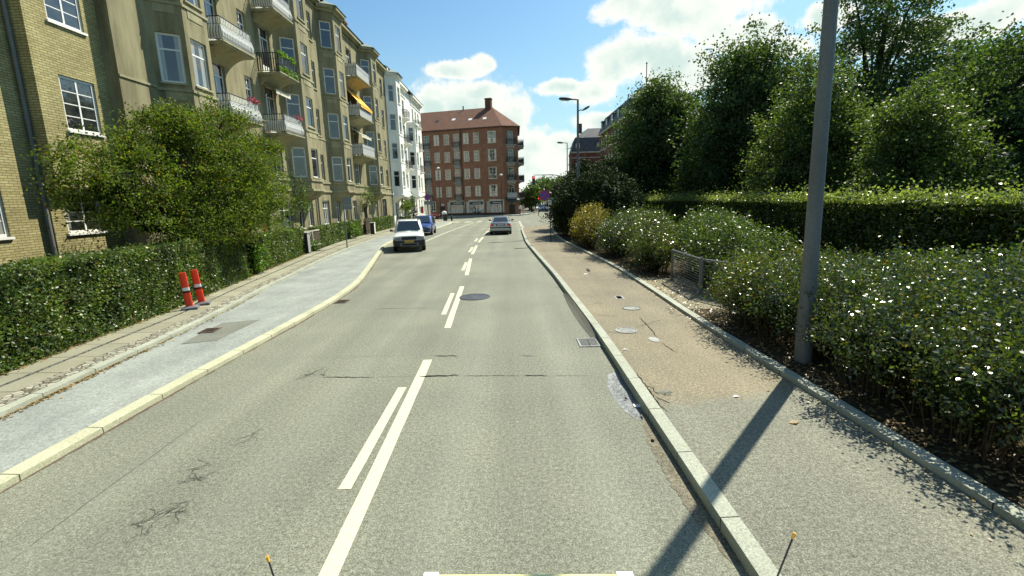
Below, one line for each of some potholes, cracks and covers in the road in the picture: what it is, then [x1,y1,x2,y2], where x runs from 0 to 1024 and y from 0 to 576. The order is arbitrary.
crack [125,500,190,544]
crack [637,374,672,411]
drain grate [576,338,601,347]
crack [178,458,223,484]
